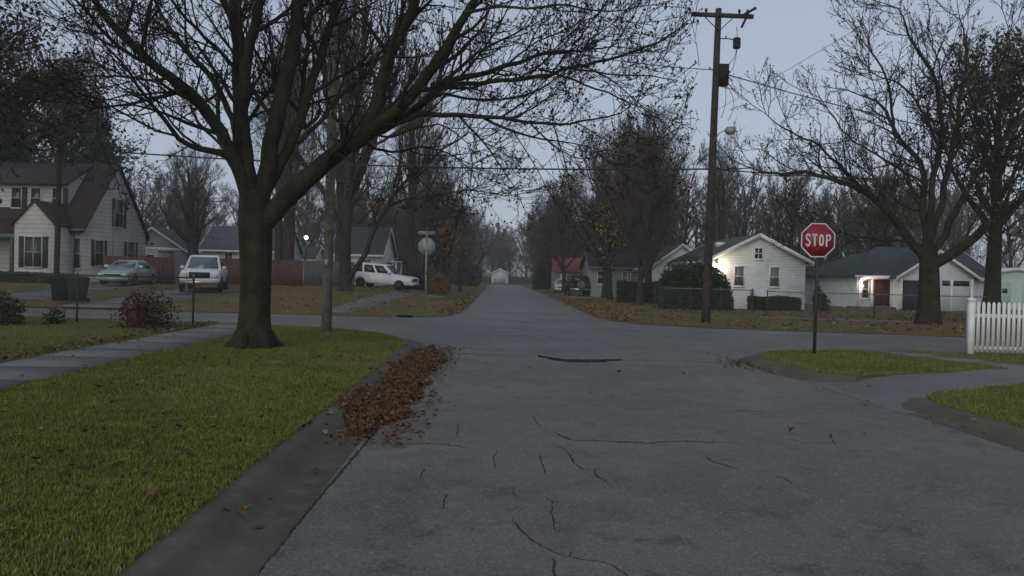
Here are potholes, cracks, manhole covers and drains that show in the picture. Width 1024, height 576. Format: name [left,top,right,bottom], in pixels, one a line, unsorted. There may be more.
crack [532,416,738,486]
crack [512,498,629,576]
